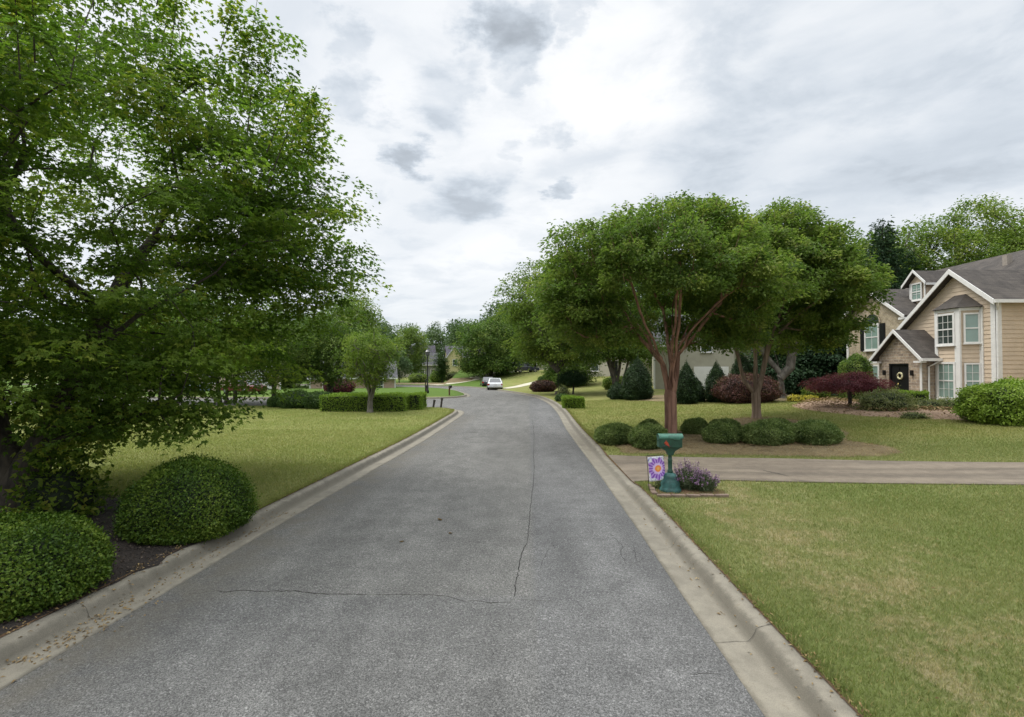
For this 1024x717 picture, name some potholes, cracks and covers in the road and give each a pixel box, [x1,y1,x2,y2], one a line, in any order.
crack [190,420,558,603]
